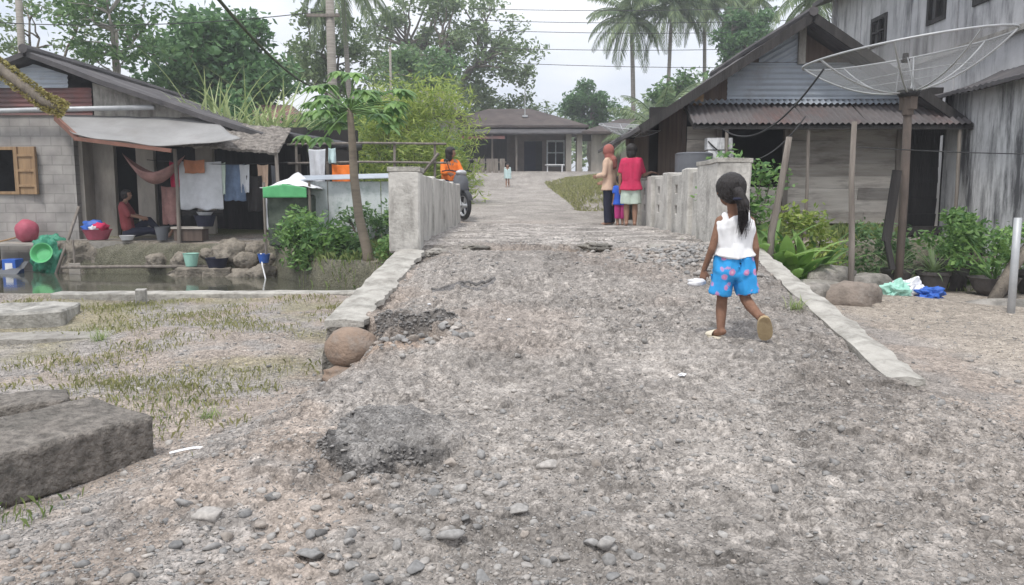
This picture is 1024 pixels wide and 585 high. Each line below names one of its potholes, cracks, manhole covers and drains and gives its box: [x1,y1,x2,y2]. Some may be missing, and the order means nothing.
pothole [464,244,638,252]
crack [431,276,496,292]
